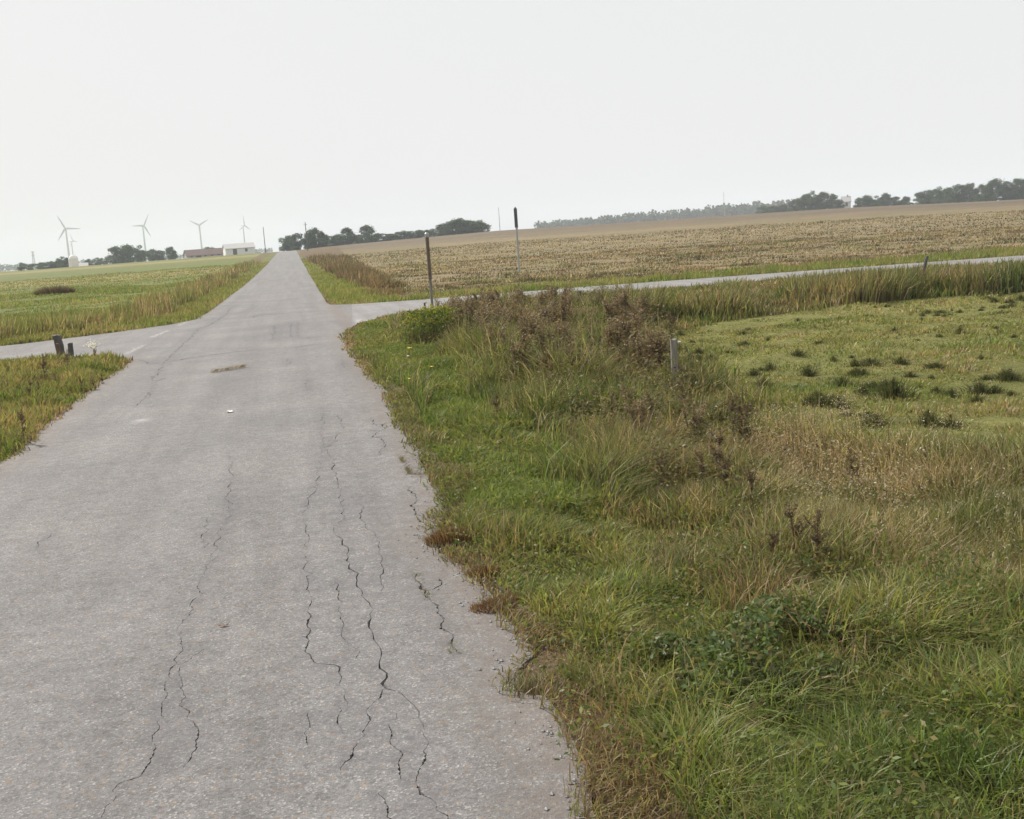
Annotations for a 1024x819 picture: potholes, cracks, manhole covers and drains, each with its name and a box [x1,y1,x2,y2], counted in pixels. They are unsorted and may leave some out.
crack [101,456,234,818]
crack [302,414,448,819]
crack [415,574,457,651]
crack [137,309,240,406]
